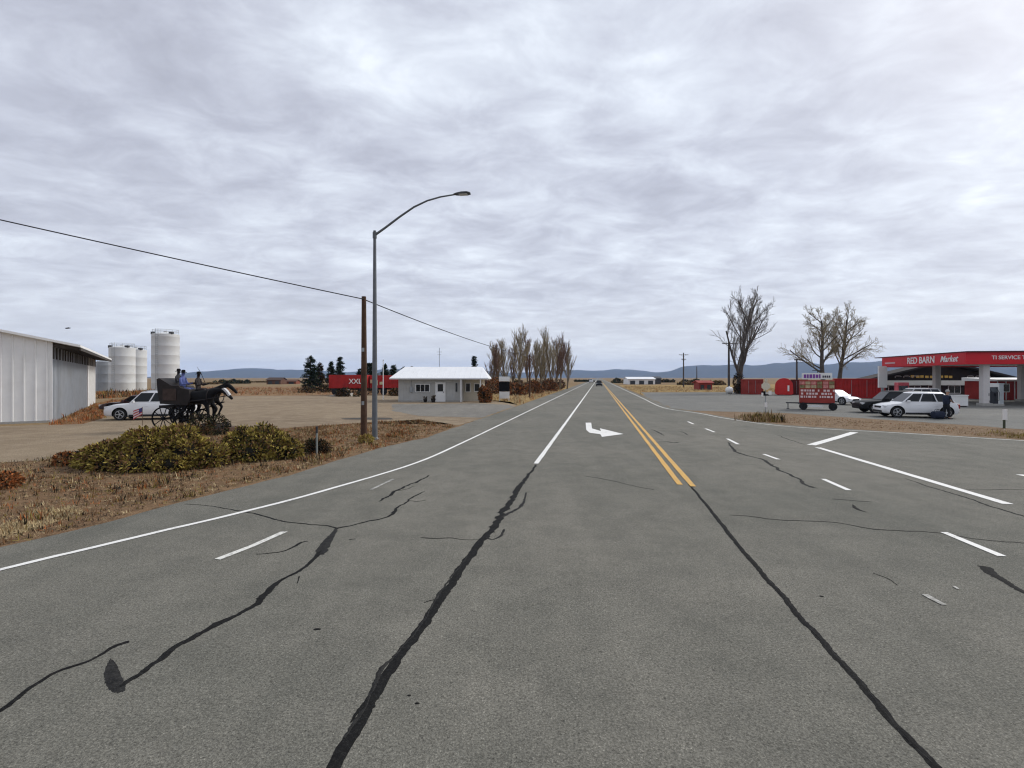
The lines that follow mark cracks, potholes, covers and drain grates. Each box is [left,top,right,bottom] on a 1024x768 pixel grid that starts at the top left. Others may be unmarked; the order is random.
crack [736,499,1021,543]
crack [380,475,429,501]
